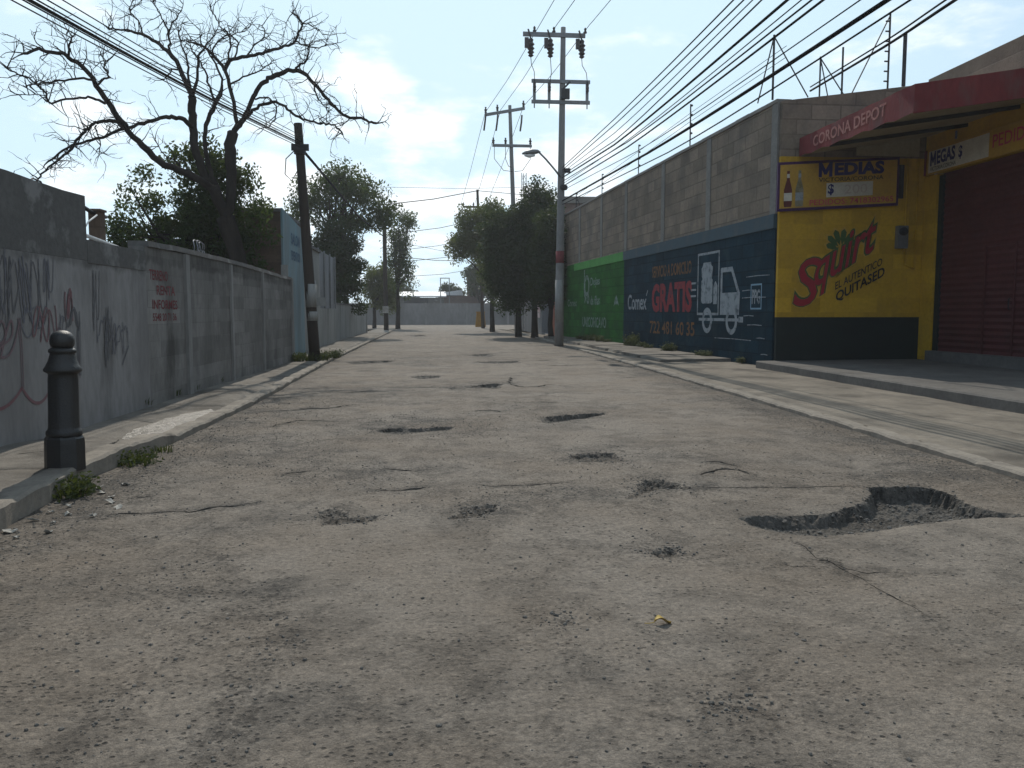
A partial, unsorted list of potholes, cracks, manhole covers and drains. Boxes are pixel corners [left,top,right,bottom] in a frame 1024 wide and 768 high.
pothole [315,508,379,526]
crack [266,391,372,427]
pothole [541,413,605,423]
pothole [446,504,500,519]
crack [781,539,941,624]
pothole [738,486,1024,537]
crack [109,496,256,515]
crack [697,461,853,489]
pothole [649,547,682,558]
pothole [628,479,693,499]
pothole [571,453,626,463]
